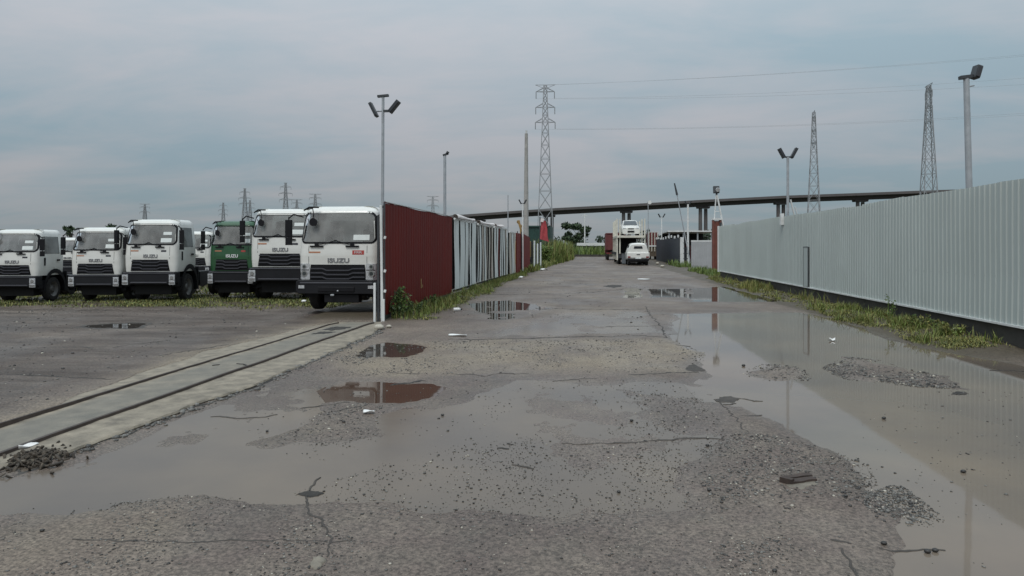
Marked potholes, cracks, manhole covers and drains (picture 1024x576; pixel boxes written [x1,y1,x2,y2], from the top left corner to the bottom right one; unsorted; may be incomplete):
crack [72,477,355,557]
crack [562,398,763,445]
